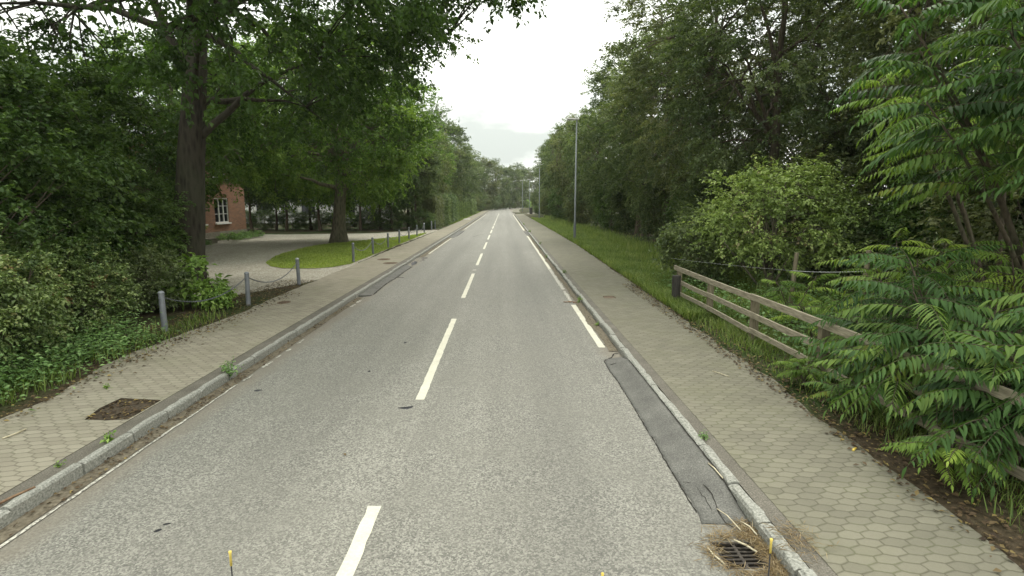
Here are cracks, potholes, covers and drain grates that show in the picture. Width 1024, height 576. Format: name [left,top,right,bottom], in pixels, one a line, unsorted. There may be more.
crack [688,482,733,527]
drain grate [712,542,768,569]
